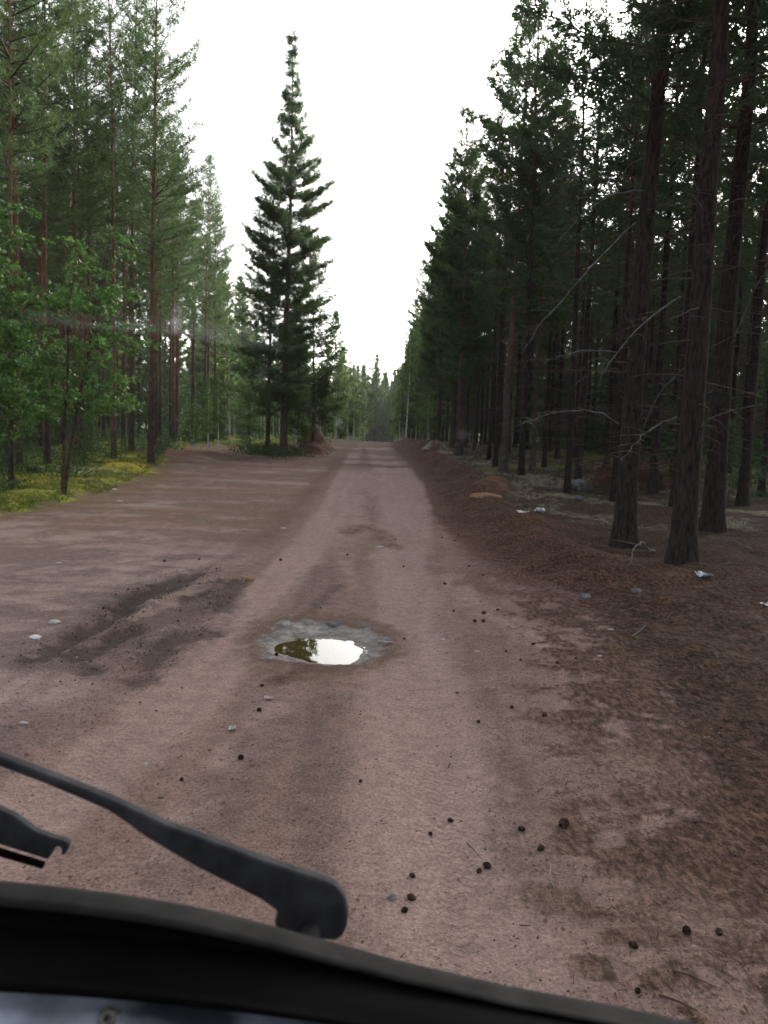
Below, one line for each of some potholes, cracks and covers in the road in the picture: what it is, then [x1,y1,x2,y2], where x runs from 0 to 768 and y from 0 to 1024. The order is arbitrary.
pothole [248,617,400,667]
